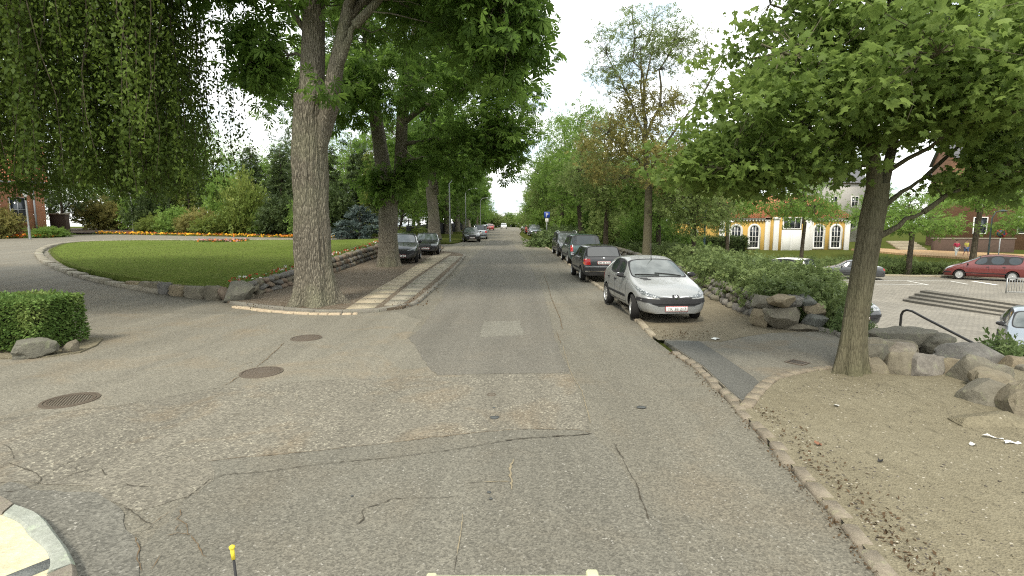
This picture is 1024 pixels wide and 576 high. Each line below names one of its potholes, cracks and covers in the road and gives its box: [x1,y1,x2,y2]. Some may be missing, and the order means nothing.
crack [124,334,590,570]
crack [614,443,649,519]
manhole cover [239,366,284,378]
crack [4,445,109,492]
